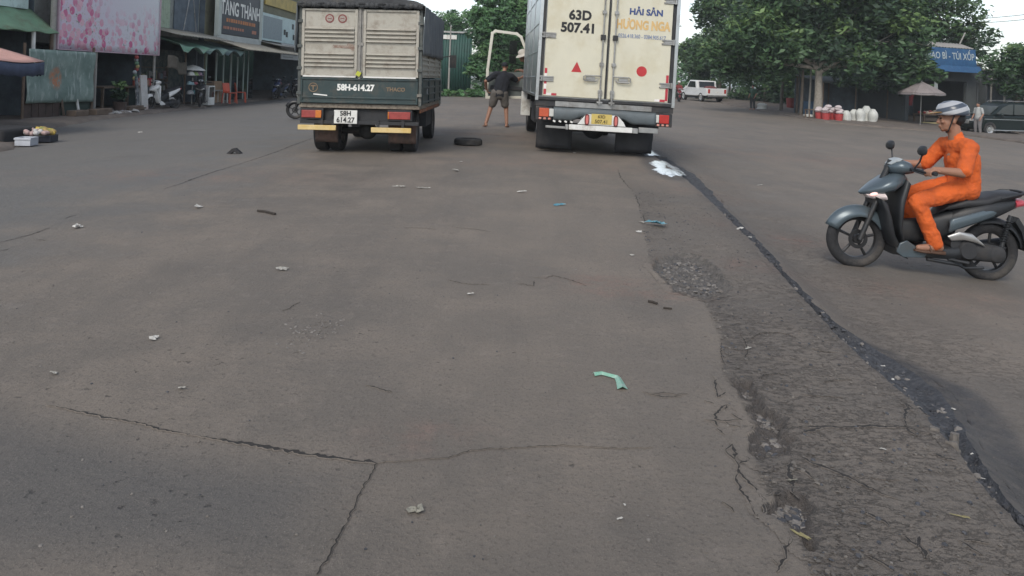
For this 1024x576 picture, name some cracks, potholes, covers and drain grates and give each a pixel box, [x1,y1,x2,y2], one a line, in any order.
pothole [642,251,741,302]
crack [378,444,653,463]
crack [524,275,584,286]
crack [617,169,646,224]
crack [704,332,935,571]
